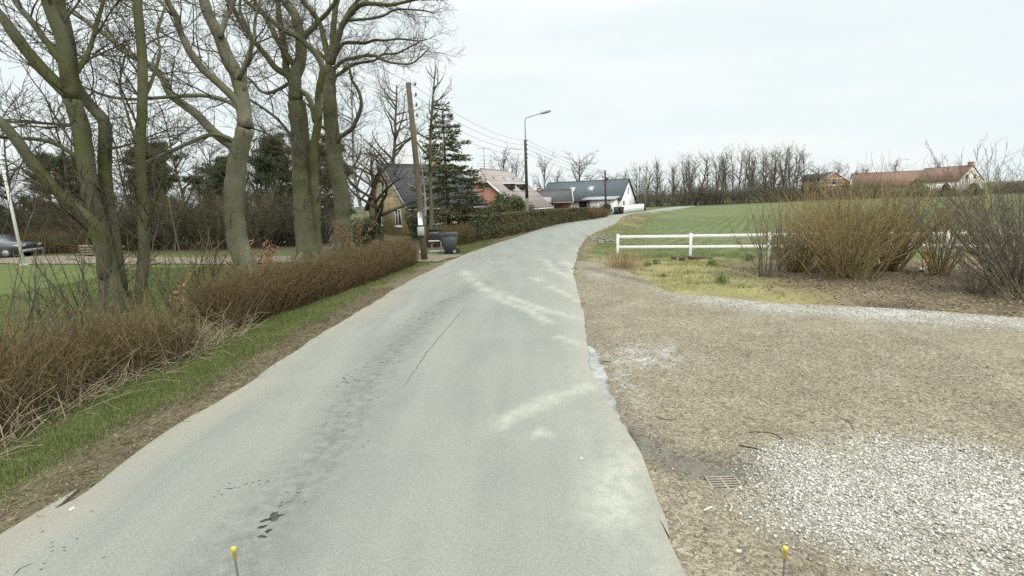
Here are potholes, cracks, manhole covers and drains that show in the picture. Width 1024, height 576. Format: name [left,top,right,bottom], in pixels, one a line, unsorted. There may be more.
drain grate [701,475,745,488]
